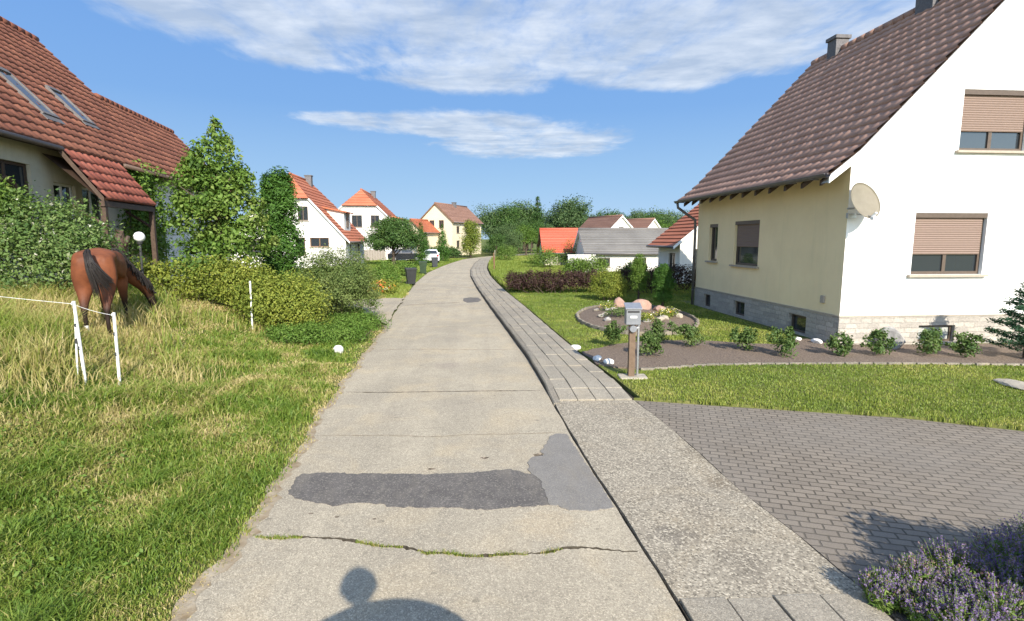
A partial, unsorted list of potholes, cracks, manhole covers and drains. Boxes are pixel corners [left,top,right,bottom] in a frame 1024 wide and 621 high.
crack [261,536,638,557]
